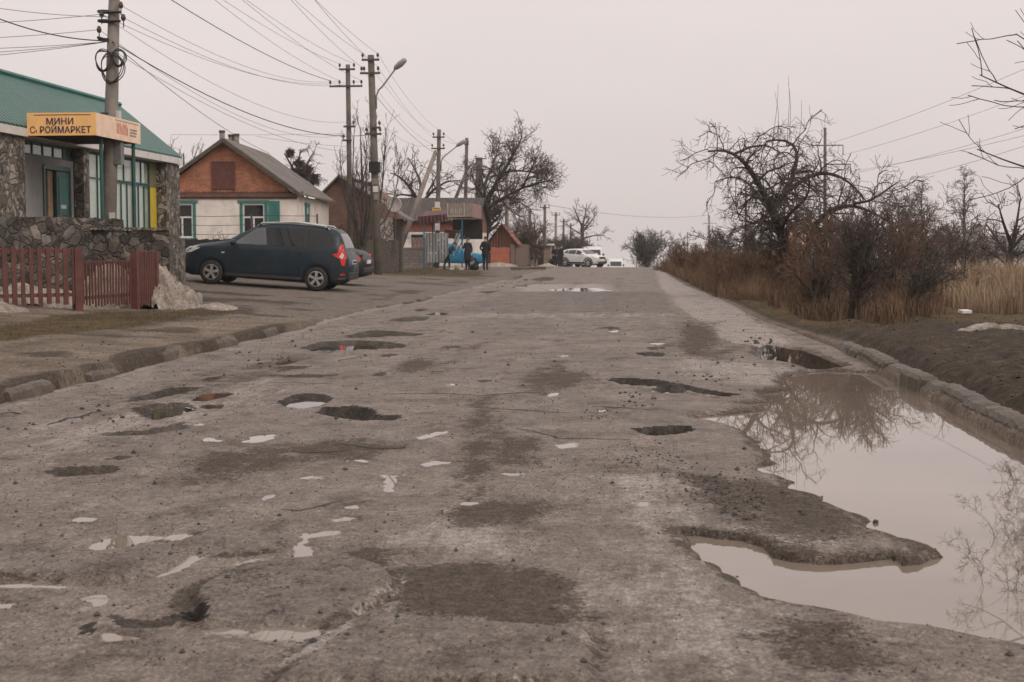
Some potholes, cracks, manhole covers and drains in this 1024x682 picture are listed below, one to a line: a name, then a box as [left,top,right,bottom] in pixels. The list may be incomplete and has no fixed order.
pothole [631,425,696,436]
pothole [274,393,335,408]
pothole [608,378,677,387]
pothole [300,340,406,351]
pothole [43,465,121,477]
pothole [130,402,197,420]
crack [516,428,630,440]
pothole [180,601,211,622]
pothole [652,384,687,393]
pothole [343,330,424,338]
pothole [316,405,402,421]
